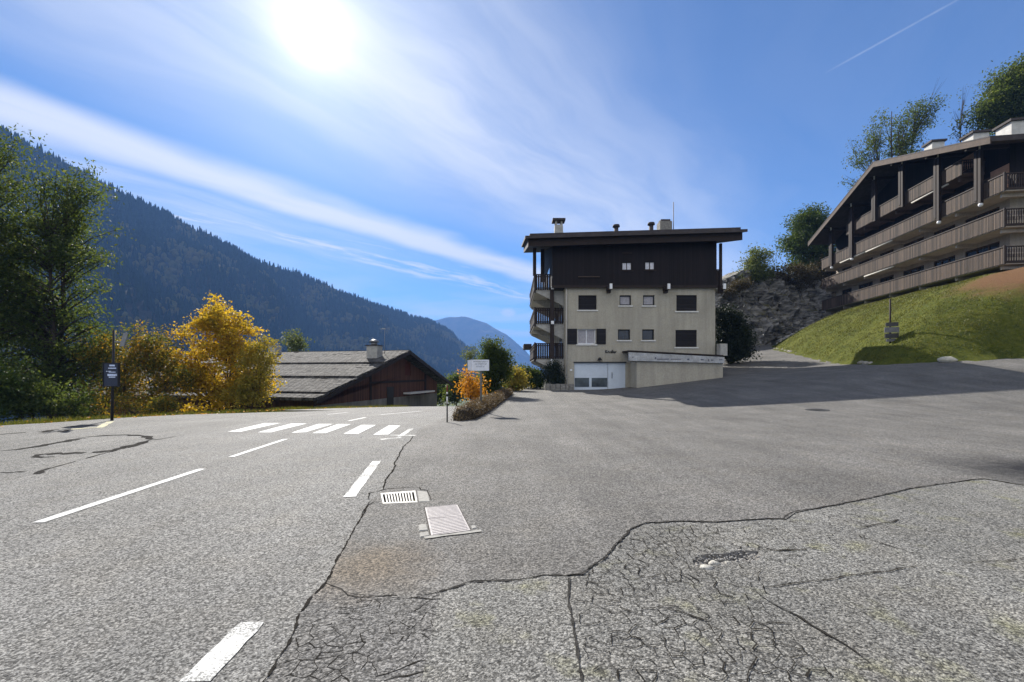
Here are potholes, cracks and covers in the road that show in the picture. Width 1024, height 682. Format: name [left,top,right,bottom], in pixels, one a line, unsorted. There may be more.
pothole [692,549,761,570]
drain grate [381,491,430,504]
crack [579,512,918,682]
manhole cover [419,504,481,539]
crack [262,437,440,682]
crack [567,578,584,682]
